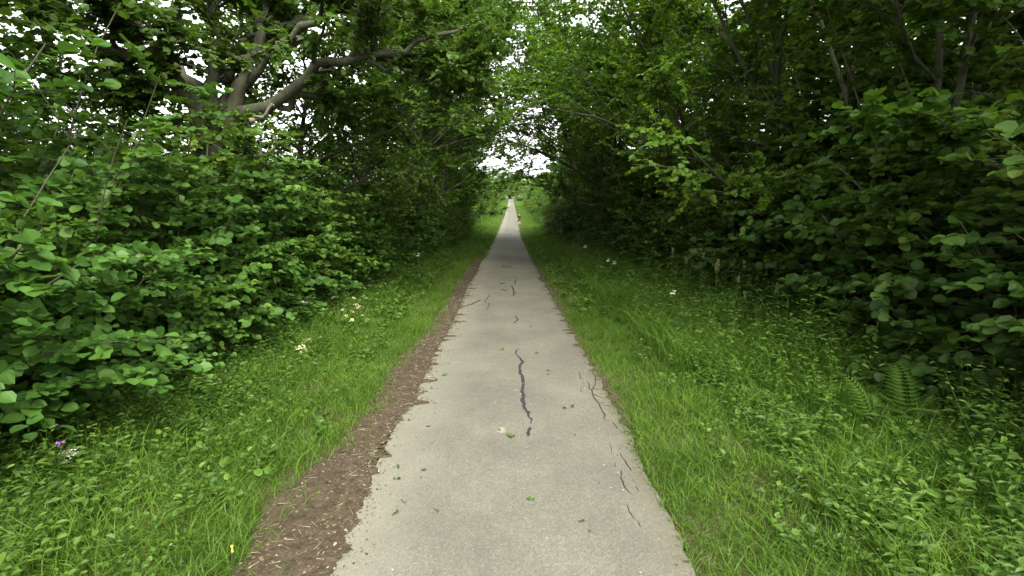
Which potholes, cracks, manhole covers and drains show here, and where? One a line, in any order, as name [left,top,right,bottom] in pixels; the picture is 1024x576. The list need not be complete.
crack [578,369,640,526]
